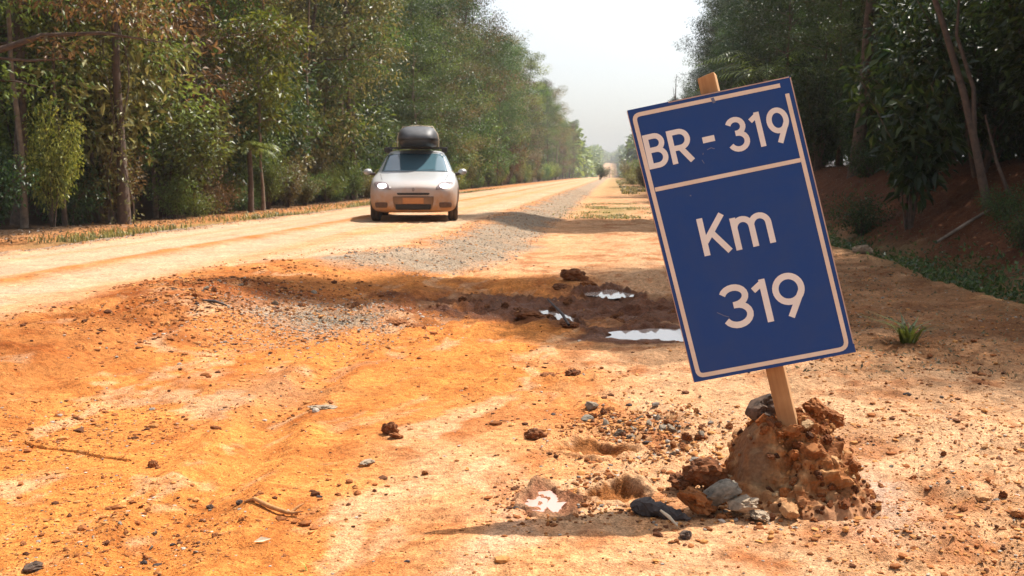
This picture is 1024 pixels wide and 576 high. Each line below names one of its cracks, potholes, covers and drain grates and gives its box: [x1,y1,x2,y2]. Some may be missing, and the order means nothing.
pothole [532,305,586,327]
pothole [541,434,649,462]
pothole [581,321,683,344]
pothole [578,302,675,317]
pothole [576,471,664,508]
pothole [572,282,643,303]
pothole [434,305,495,314]
